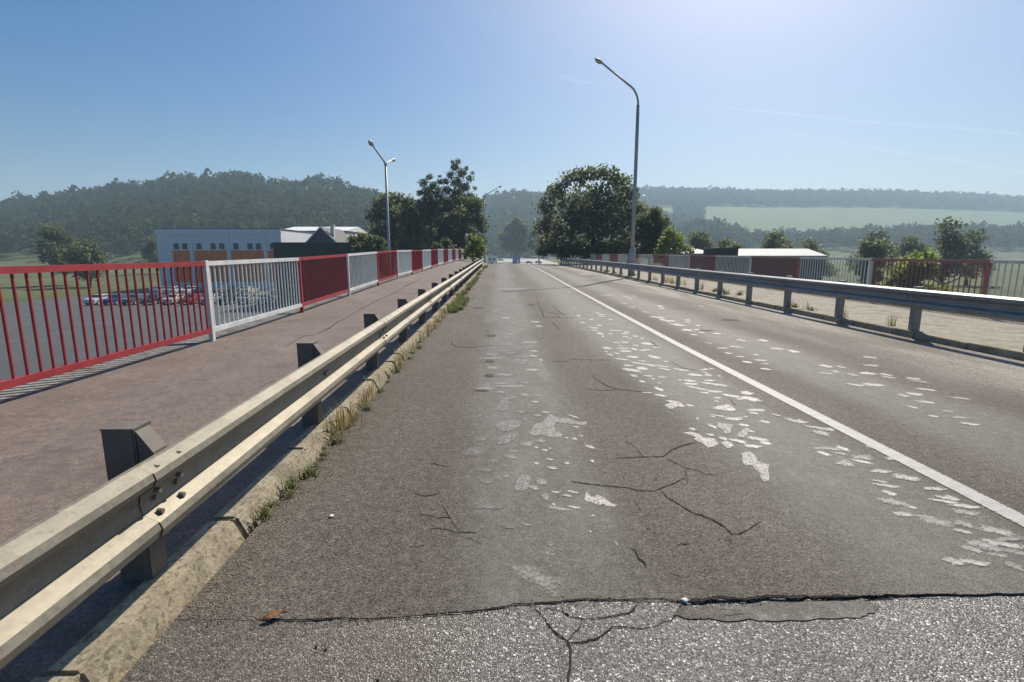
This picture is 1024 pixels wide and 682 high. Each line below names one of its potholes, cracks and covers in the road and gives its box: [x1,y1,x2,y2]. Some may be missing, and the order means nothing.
crack [572,441,761,545]
crack [532,602,682,682]
crack [415,493,482,544]
